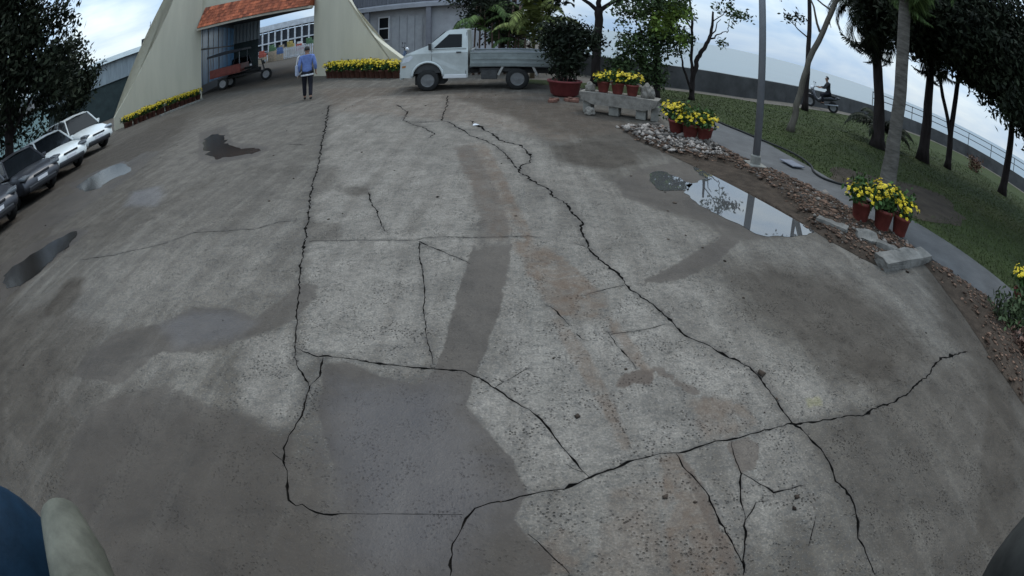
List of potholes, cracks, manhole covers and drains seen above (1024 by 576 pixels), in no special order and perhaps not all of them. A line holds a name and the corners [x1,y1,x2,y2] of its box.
crack [83,96,967,576]
